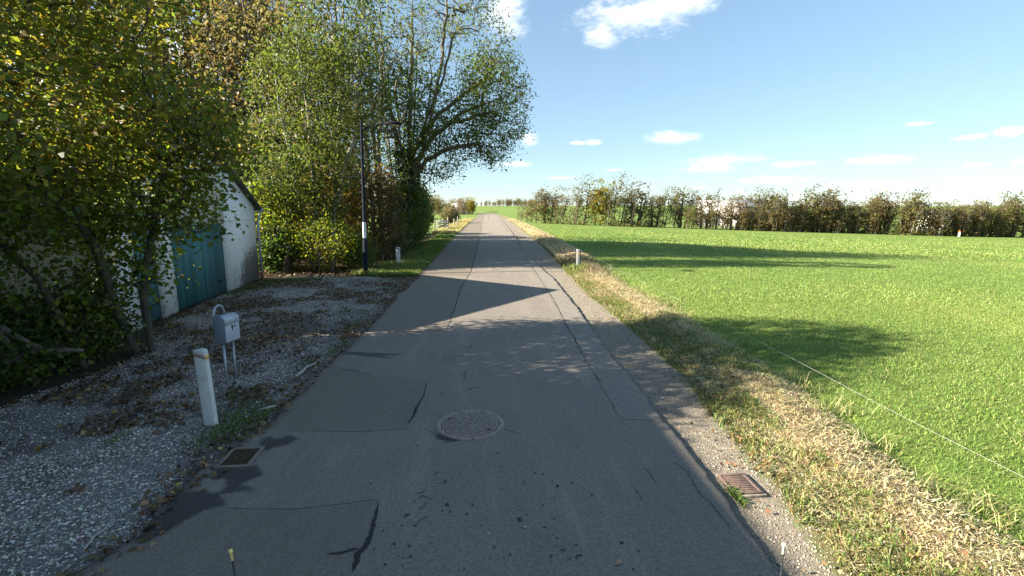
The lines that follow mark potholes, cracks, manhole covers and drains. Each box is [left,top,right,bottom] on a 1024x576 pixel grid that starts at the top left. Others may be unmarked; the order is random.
crack [635,462,730,527]
manhole cover [435,410,504,440]
drain grate [716,473,767,498]
crack [327,501,379,571]
crack [409,384,453,440]
